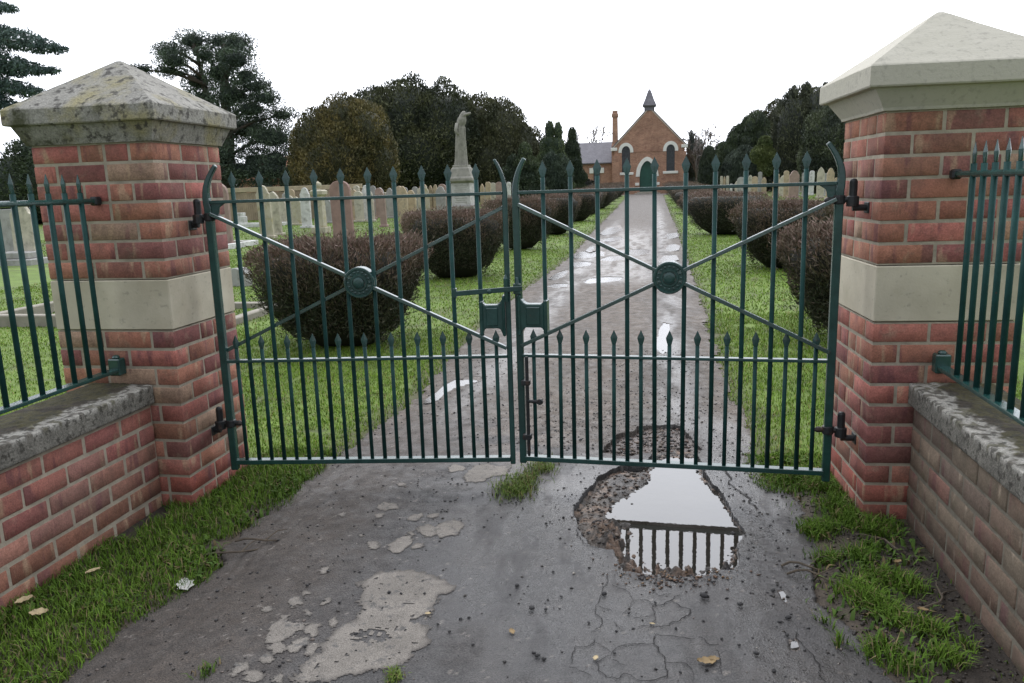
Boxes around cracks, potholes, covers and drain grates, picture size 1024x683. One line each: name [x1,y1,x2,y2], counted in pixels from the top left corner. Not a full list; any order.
pothole [574,450,744,577]
pothole [605,427,701,459]
crack [726,471,758,509]
crack [571,572,722,681]
